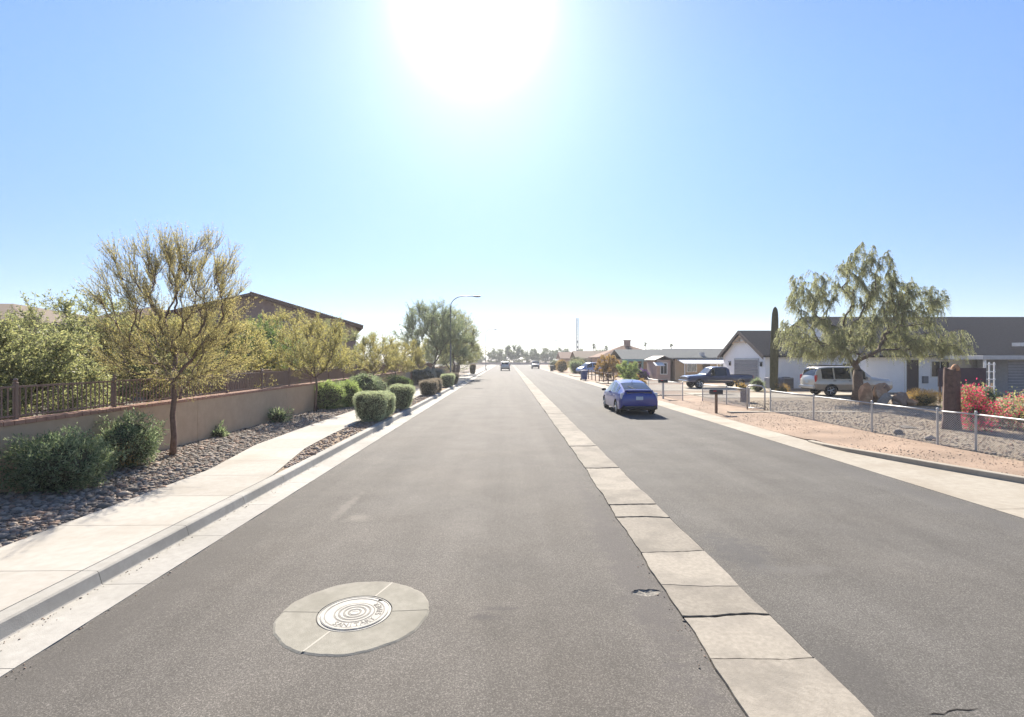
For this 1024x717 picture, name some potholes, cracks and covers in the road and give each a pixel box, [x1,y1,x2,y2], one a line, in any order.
manhole cover [273,581,429,657]
